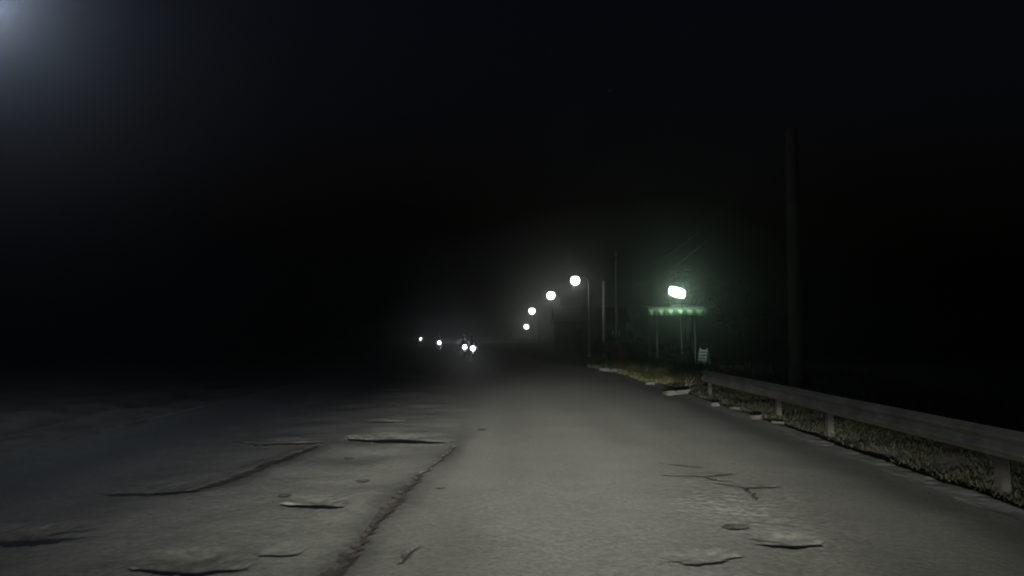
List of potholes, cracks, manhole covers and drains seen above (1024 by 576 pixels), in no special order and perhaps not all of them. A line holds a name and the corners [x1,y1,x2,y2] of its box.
pothole [109,540,268,576]
pothole [280,490,361,509]
pothole [244,539,311,559]
pothole [339,430,470,444]
crack [167,444,455,576]
pothole [735,528,834,549]
pothole [647,546,750,567]
crack [664,463,778,499]
